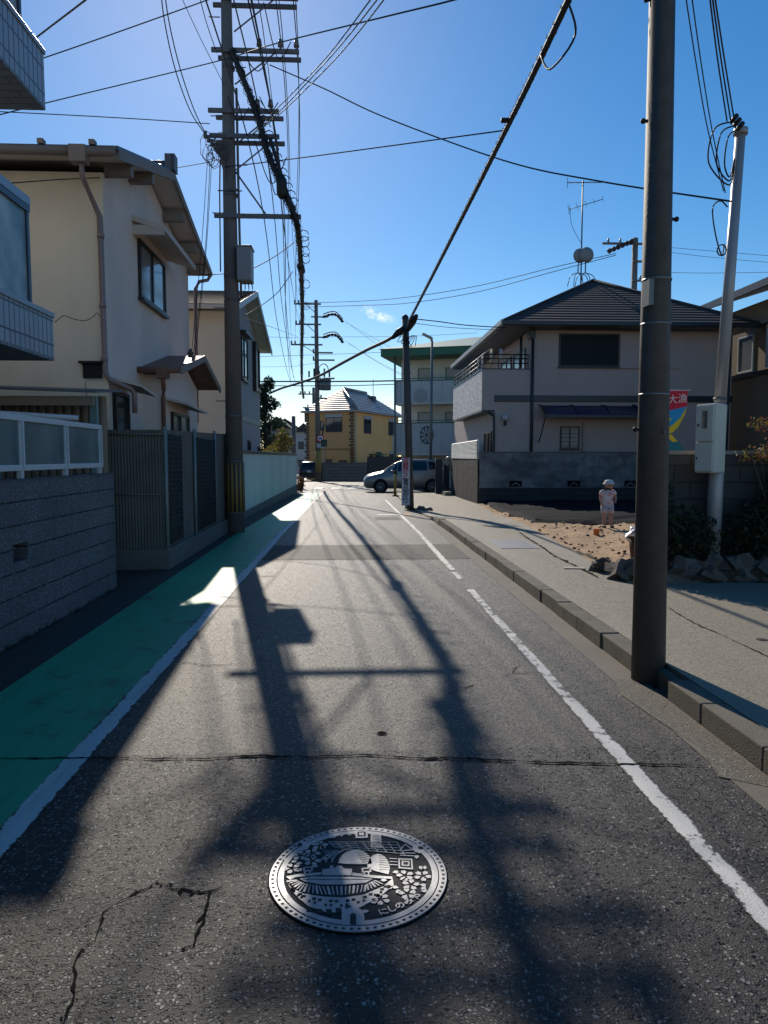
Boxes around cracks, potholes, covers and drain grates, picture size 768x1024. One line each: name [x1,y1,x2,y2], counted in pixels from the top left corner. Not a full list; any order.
manhole cover [268,827,448,934]
crack [59,882,223,1021]
